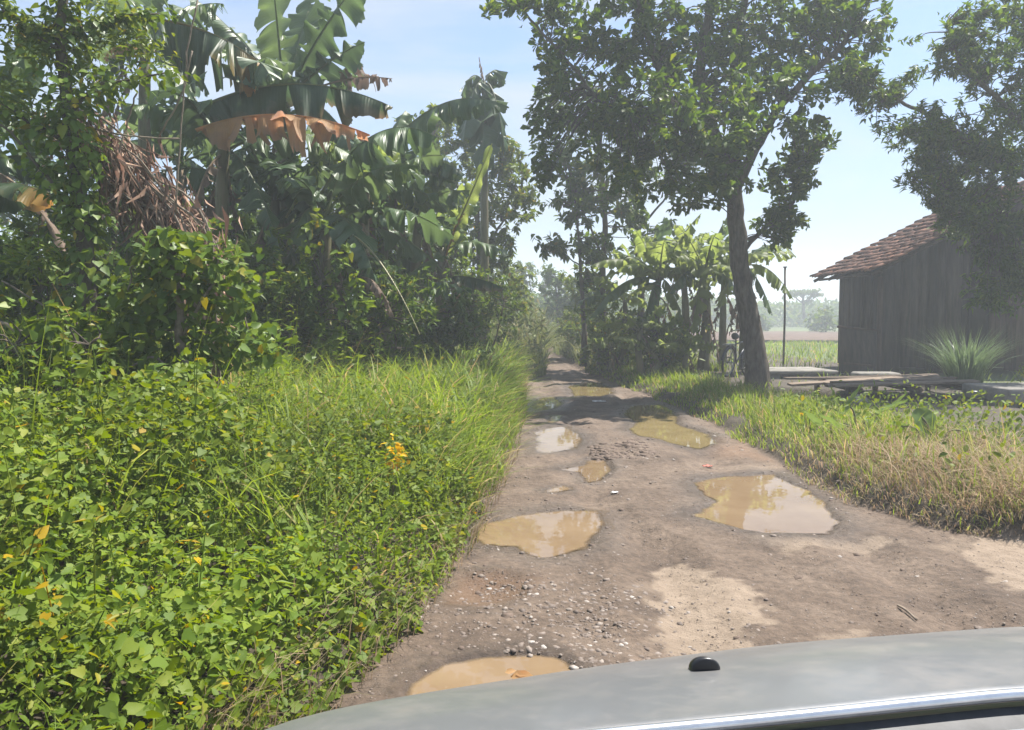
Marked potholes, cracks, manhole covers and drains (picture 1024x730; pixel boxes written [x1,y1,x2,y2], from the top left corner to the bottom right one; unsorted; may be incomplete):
pothole [679,470,853,537]
pothole [539,484,577,493]
pothole [552,456,621,483]
pothole [390,645,601,699]
pothole [526,424,590,453]
pothole [564,381,617,396]
pothole [466,505,615,561]
pothole [616,401,730,449]
